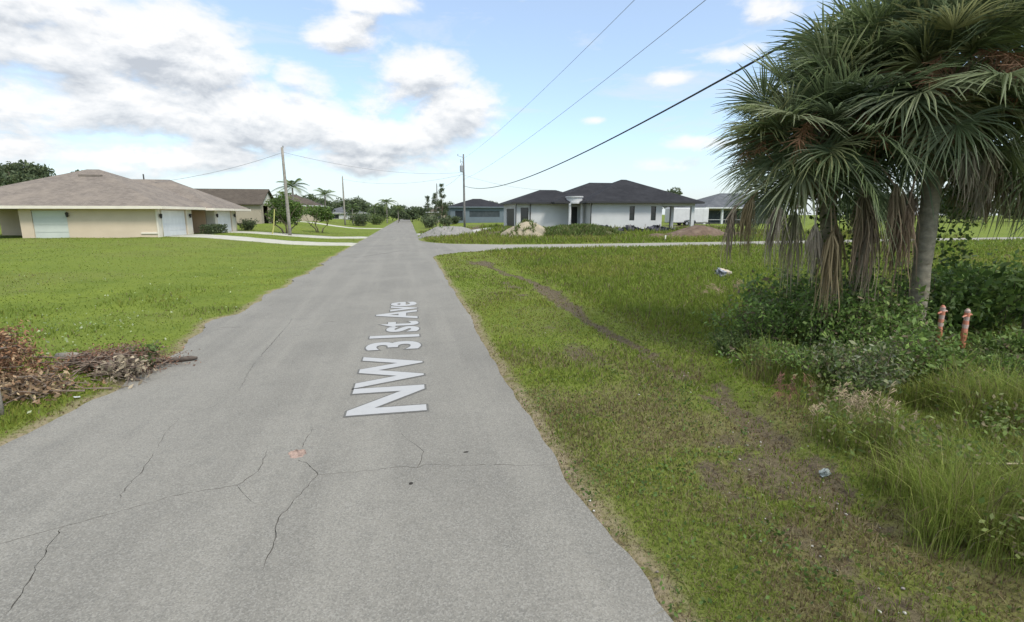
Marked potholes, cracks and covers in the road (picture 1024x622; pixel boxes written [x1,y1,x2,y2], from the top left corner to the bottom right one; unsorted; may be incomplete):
crack [120,319,292,498]
crack [0,451,267,612]
crack [263,430,549,572]
